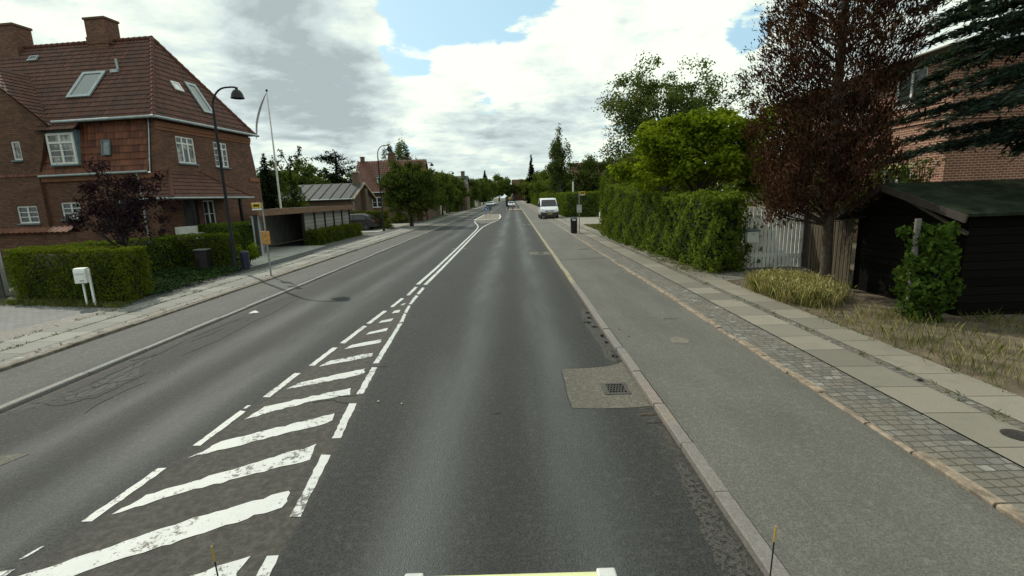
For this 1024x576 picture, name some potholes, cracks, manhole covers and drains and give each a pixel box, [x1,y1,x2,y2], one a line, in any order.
manhole cover [1000,429,1024,441]
crack [34,297,294,413]
